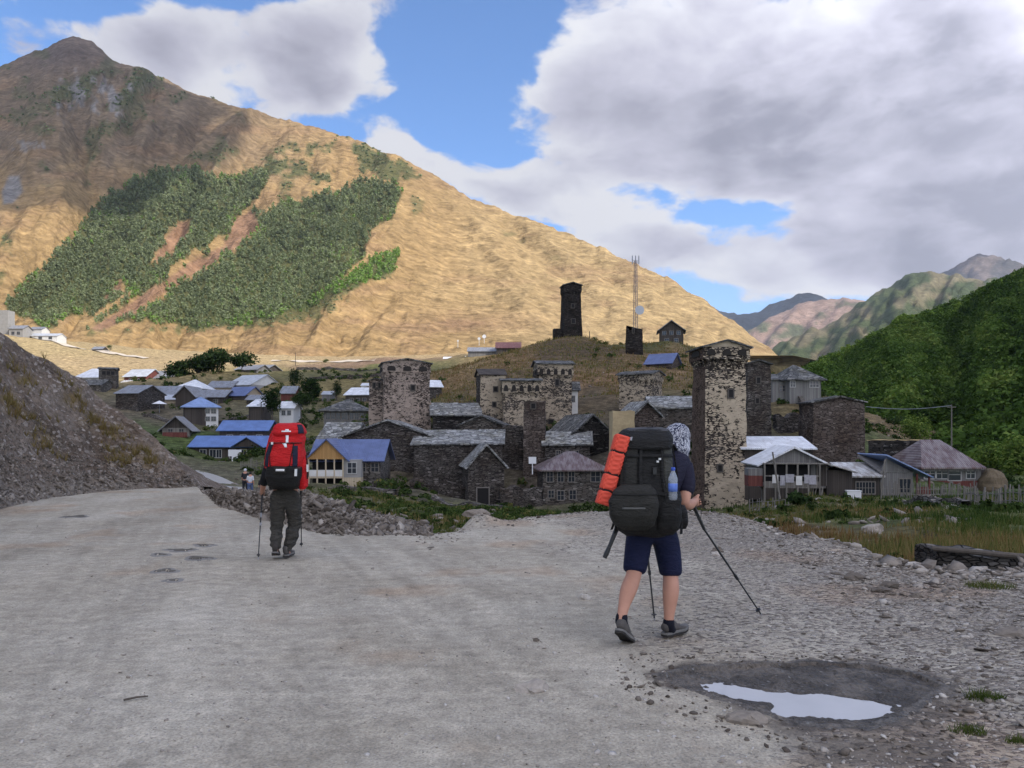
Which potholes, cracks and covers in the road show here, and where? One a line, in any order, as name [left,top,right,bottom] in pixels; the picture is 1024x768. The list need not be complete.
pothole [651,659,950,730]
